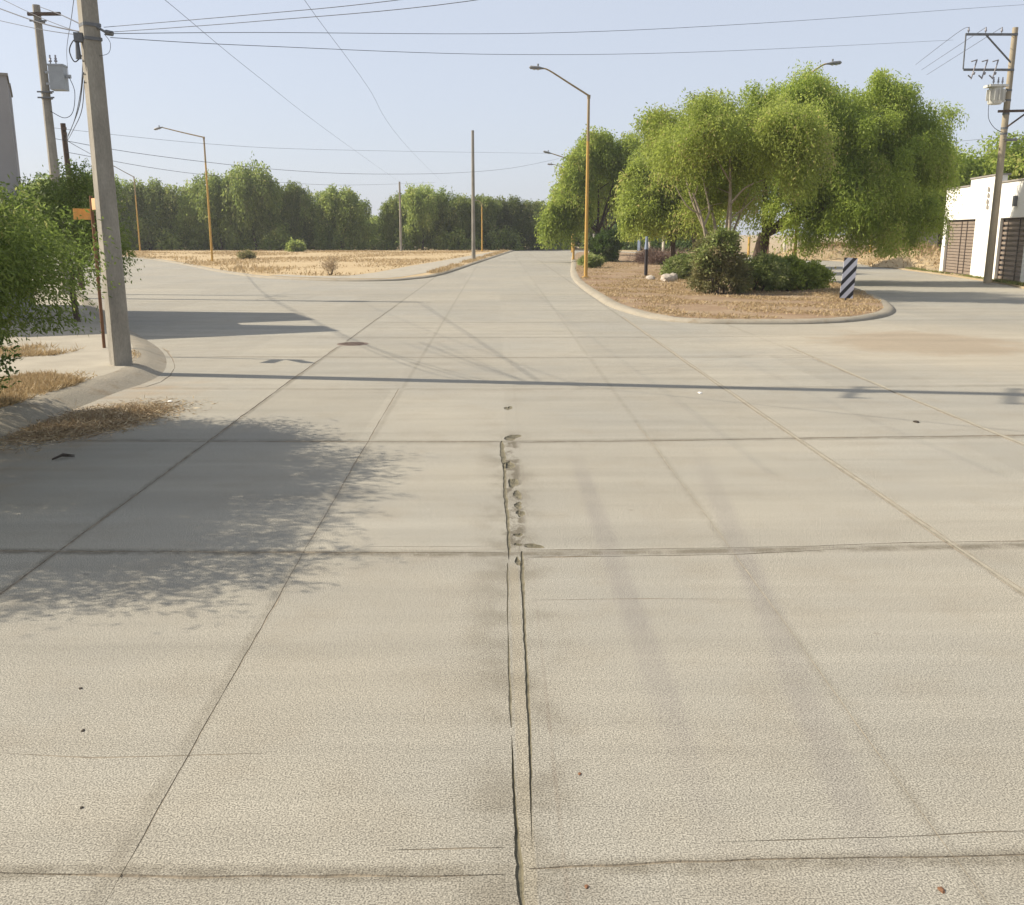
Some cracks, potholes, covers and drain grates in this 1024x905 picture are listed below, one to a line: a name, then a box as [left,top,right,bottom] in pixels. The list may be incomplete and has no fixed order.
crack [500,441,532,905]
